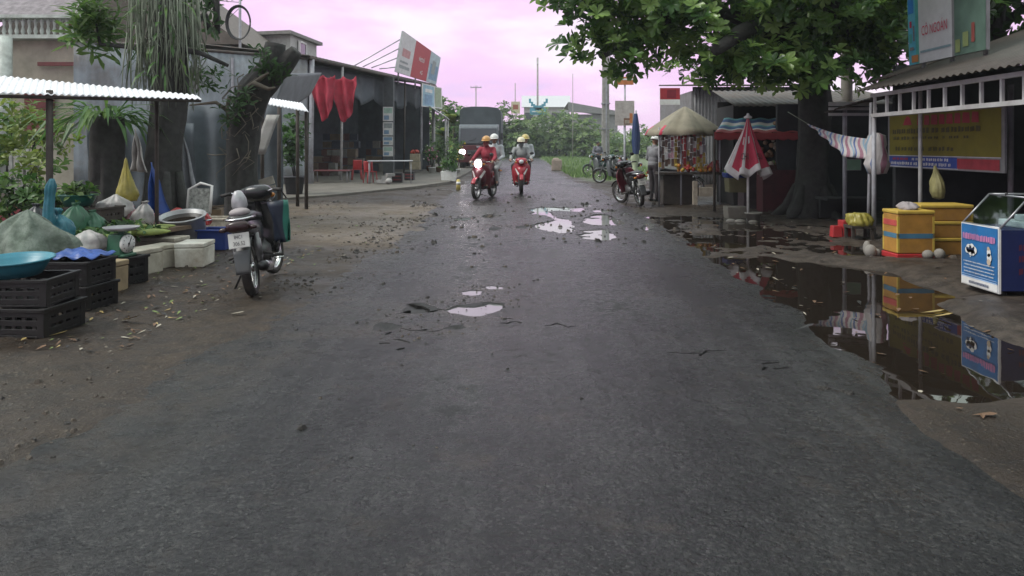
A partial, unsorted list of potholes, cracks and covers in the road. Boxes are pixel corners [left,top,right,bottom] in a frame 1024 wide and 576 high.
pothole [582,214,625,230]
pothole [577,229,618,240]
pothole [445,302,505,316]
pothole [528,207,584,233]
crack [761,362,787,370]
pothole [402,303,439,314]
pothole [373,322,402,332]
